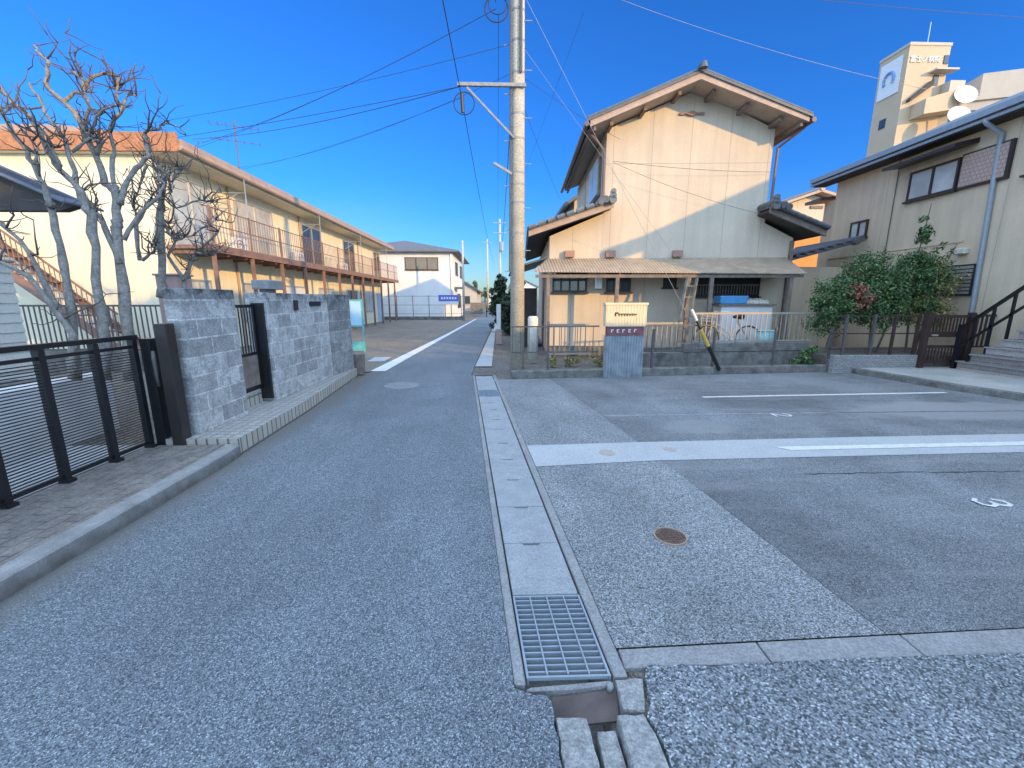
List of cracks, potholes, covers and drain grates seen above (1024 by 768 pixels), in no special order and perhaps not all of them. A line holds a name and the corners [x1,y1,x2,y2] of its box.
drain grate [513,594,611,685]
manhole cover [653,527,688,546]
